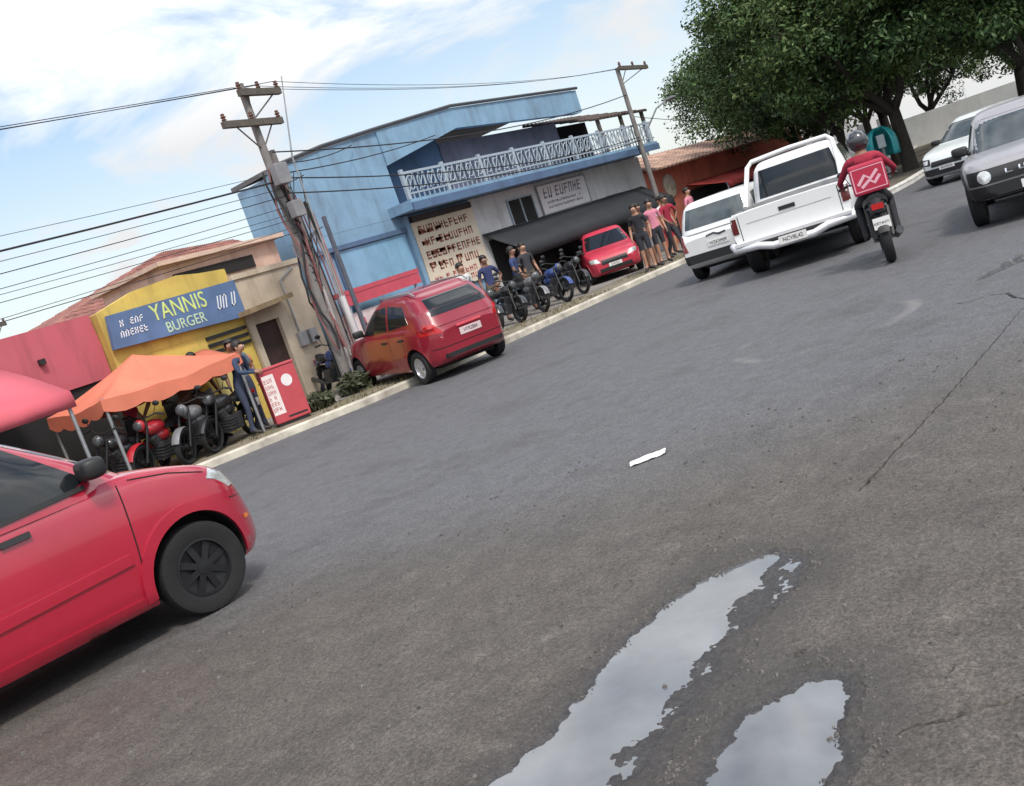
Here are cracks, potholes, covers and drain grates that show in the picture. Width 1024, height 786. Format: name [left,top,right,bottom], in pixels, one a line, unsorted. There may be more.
pothole [677,660,872,786]
crack [896,694,1024,736]
pothole [458,546,817,786]
